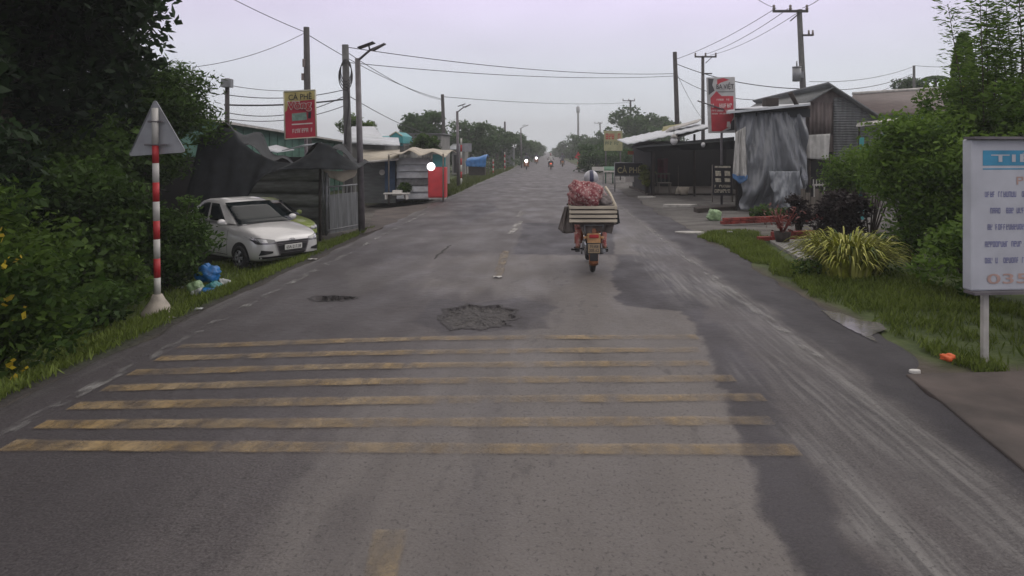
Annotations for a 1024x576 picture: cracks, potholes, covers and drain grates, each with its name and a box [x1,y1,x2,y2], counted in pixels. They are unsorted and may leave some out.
pothole [437,303,522,331]
